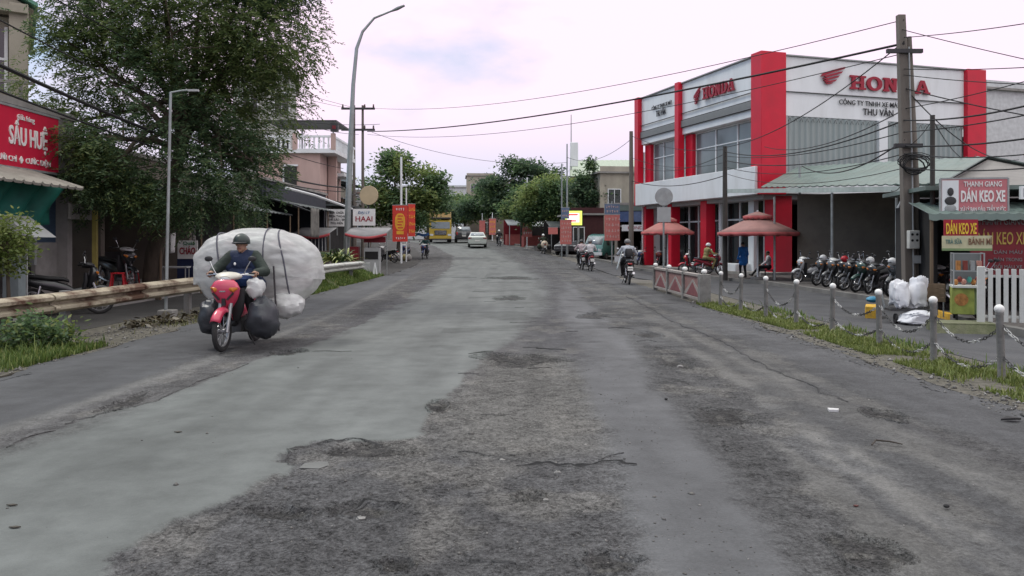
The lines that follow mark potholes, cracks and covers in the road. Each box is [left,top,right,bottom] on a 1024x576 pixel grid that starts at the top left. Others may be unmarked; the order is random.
pothole [425,398,451,414]
crack [458,451,637,470]
pothole [468,352,578,369]
pothole [857,406,909,425]
pothole [305,442,426,460]
pothole [376,555,417,574]
pothole [319,499,405,521]
